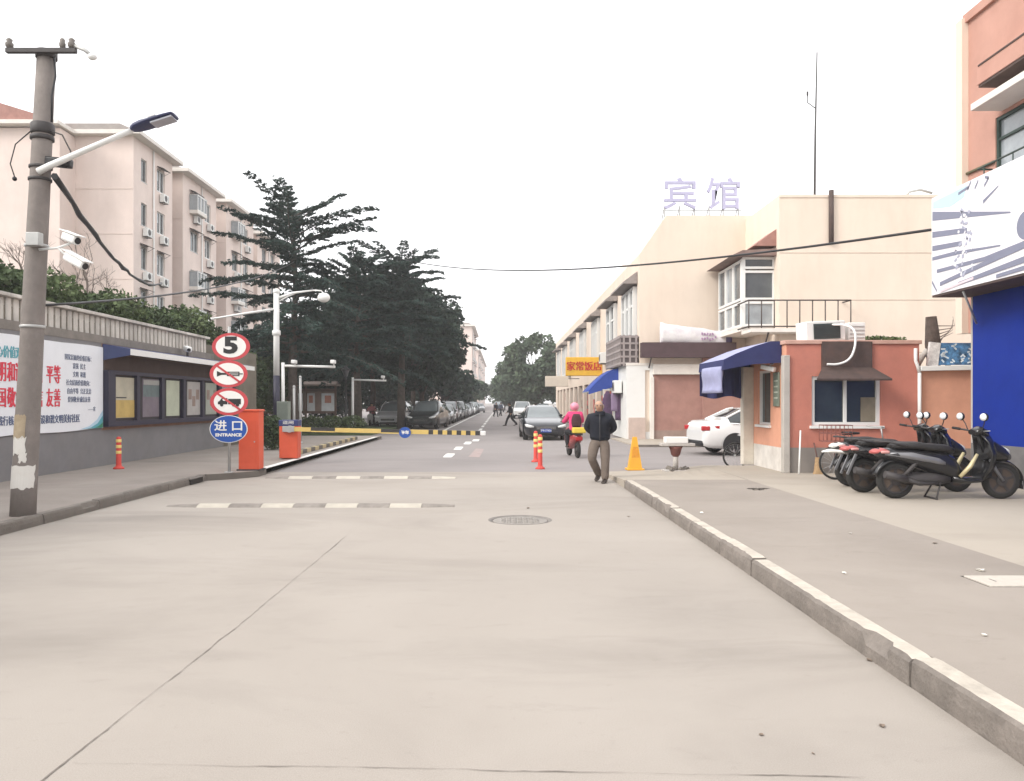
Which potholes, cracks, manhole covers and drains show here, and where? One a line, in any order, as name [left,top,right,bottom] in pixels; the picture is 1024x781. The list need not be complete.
manhole cover [488,515,552,525]
manhole cover [961,575,1024,587]
